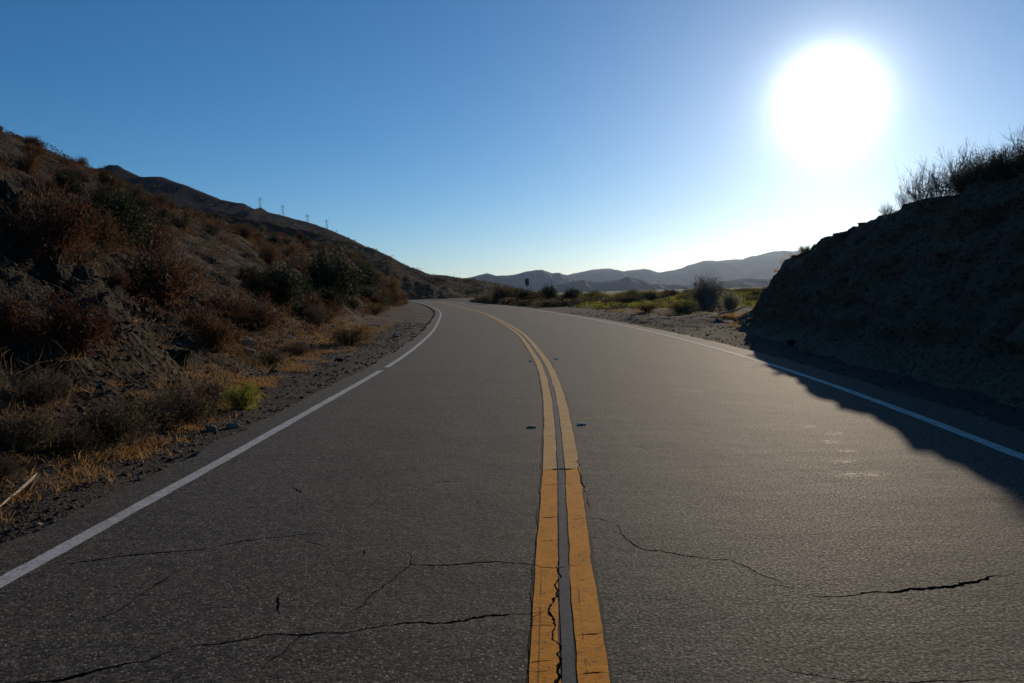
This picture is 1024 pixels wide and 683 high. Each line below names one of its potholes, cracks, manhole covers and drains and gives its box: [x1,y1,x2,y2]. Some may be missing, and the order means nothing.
crack [12,553,562,683]
crack [601,519,1020,597]
crack [60,530,322,617]
